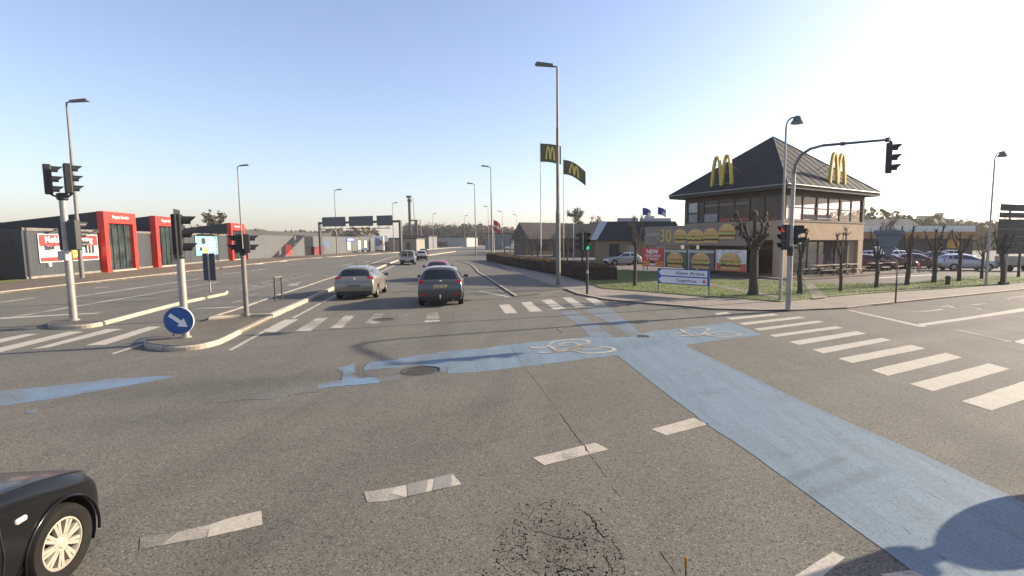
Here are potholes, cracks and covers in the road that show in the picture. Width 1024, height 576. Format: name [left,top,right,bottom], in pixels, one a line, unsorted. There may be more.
crack [482,499,626,576]
crack [519,359,621,498]
manhole cover [400,367,440,376]
